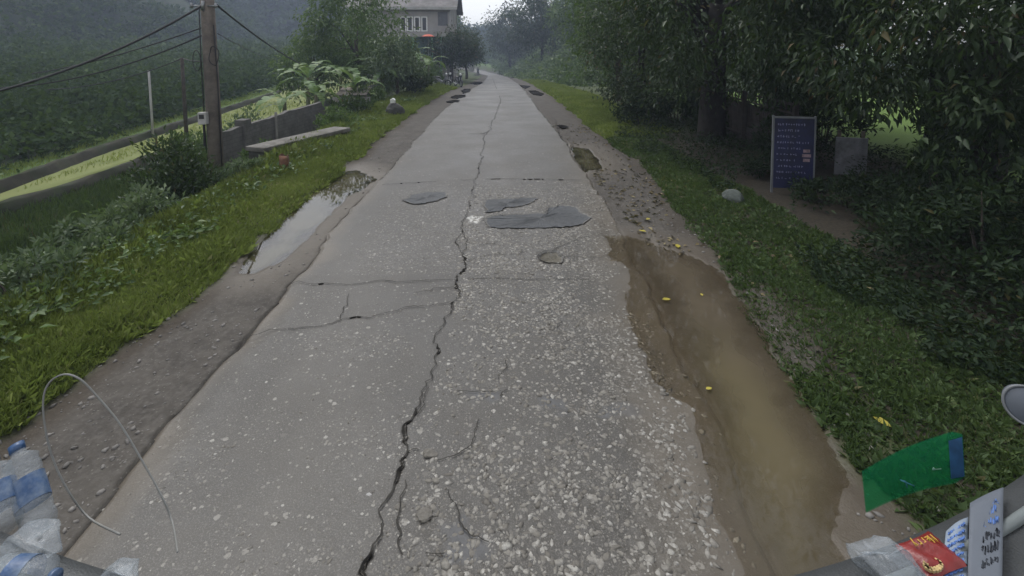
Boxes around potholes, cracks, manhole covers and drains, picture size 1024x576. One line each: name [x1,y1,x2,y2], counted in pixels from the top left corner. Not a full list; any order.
crack [236,80,614,576]
